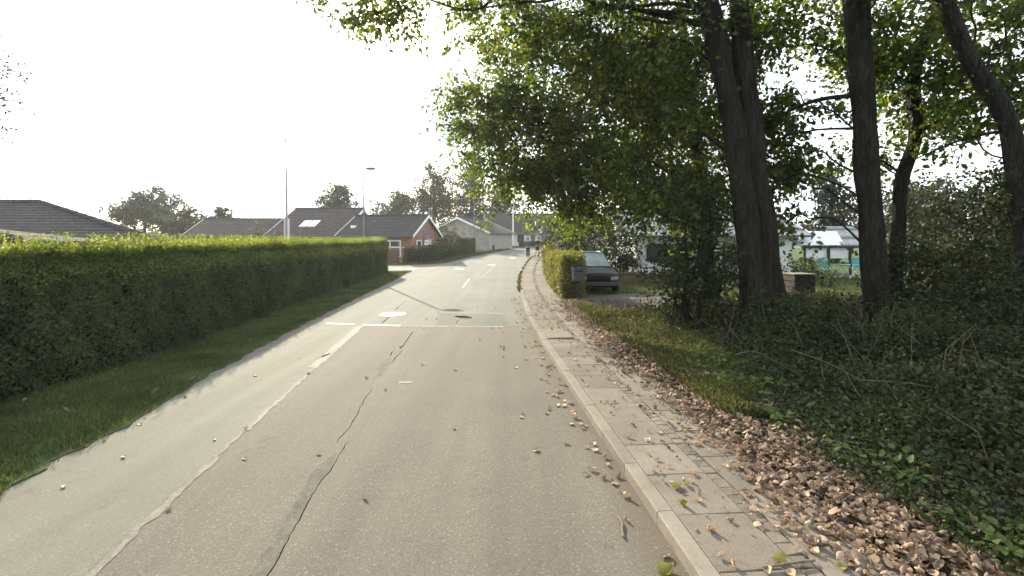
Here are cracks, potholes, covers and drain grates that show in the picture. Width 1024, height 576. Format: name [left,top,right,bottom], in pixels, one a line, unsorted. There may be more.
crack [267,332,413,576]
